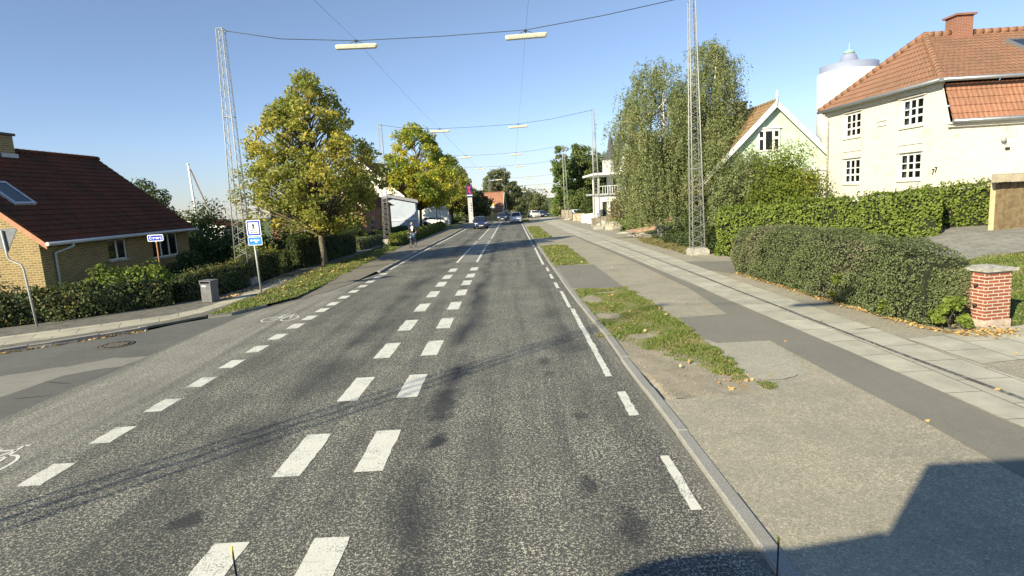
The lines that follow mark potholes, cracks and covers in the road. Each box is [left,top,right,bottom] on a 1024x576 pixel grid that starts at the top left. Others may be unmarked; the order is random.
manhole cover [96,341,135,349]
